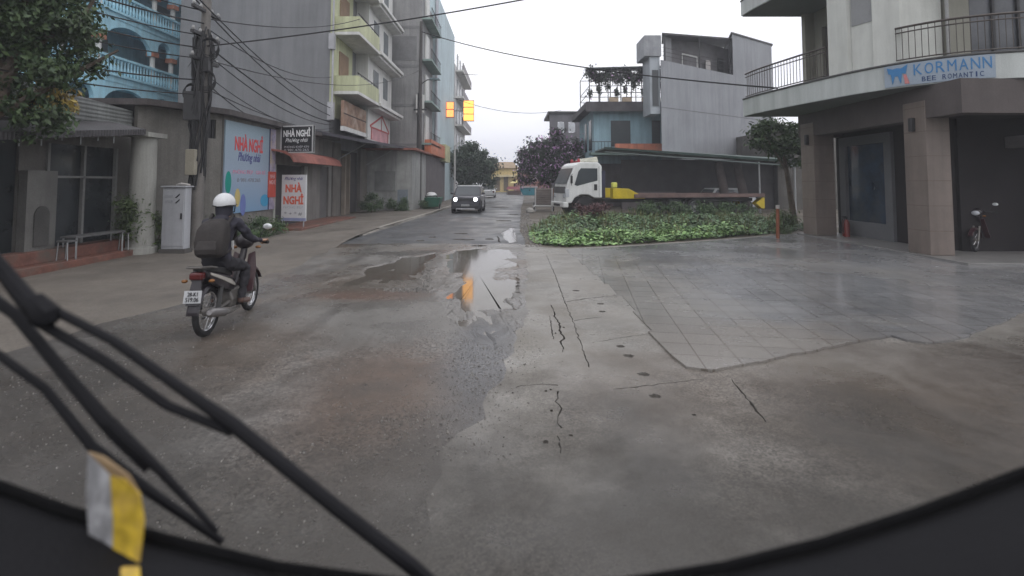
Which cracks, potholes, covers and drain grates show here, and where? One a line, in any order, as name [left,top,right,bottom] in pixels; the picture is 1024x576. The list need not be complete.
crack [518,384,563,453]
pothole [429,247,522,350]
pothole [321,252,437,290]
crack [549,305,565,352]
crack [618,379,700,389]
crack [732,380,766,422]
